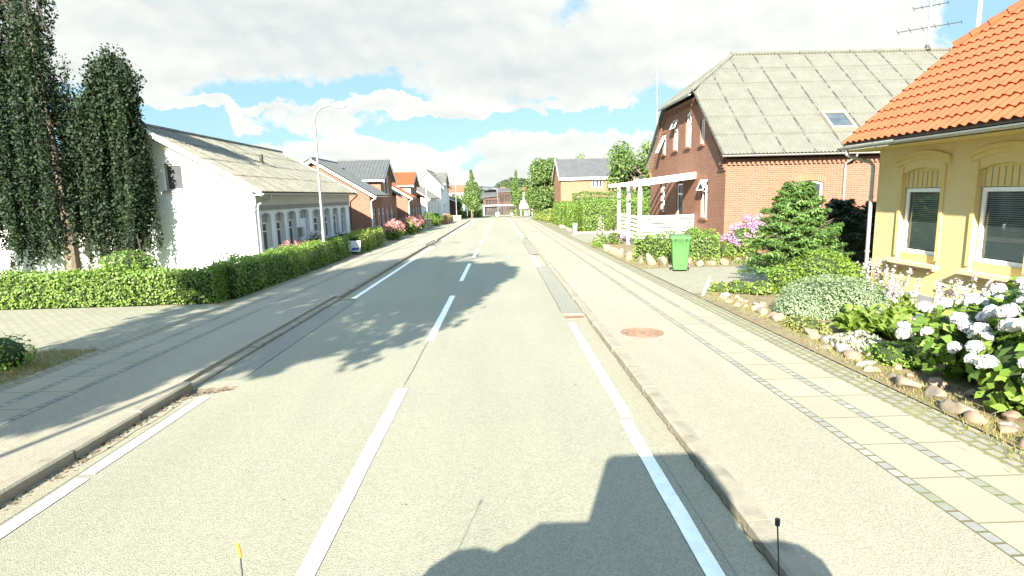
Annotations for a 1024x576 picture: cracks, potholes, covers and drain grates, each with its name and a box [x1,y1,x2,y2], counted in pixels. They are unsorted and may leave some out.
manhole cover [618,327,667,338]
